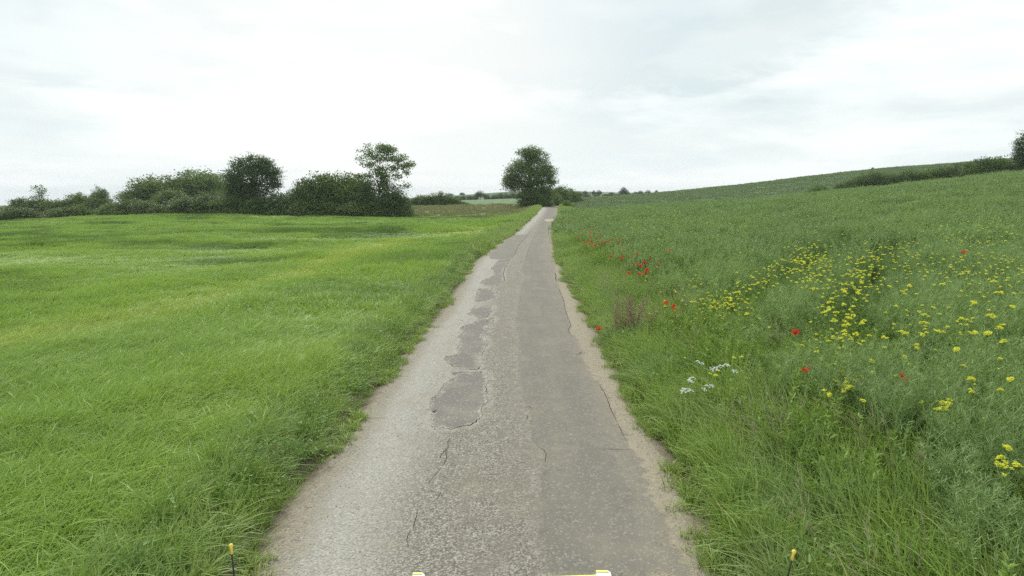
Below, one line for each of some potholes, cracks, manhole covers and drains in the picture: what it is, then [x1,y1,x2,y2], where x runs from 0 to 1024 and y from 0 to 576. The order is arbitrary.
pothole [474,288,498,302]
pothole [429,371,488,430]
pothole [480,259,511,287]
pothole [444,305,495,370]
